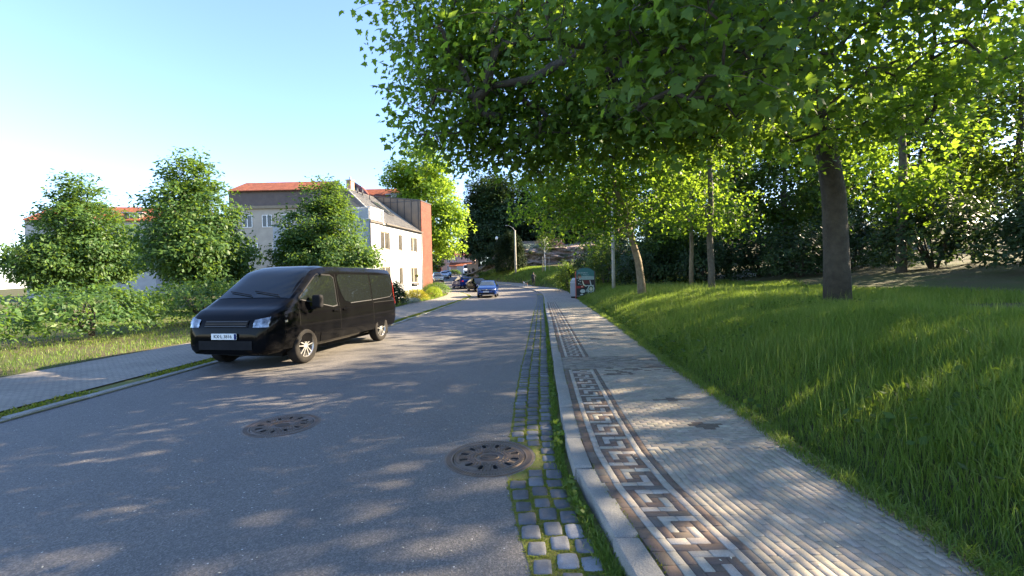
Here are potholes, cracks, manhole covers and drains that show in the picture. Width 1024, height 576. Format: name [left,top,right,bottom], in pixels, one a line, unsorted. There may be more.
manhole cover [241,414,321,438]
manhole cover [444,440,534,477]
